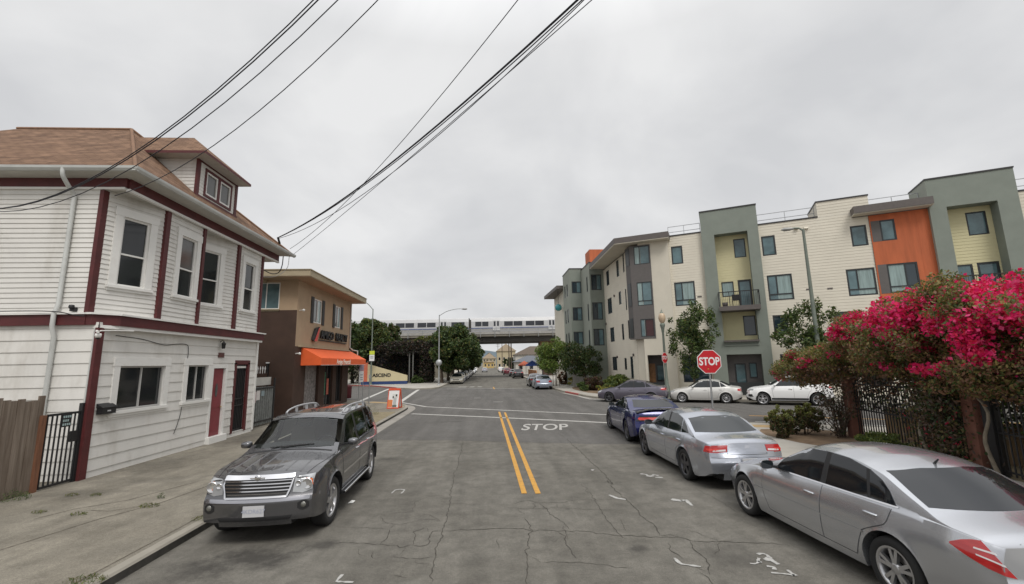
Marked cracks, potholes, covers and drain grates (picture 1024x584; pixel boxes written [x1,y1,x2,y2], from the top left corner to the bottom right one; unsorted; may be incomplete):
crack [561,435,660,538]
crack [340,443,463,580]
crack [453,499,781,584]
